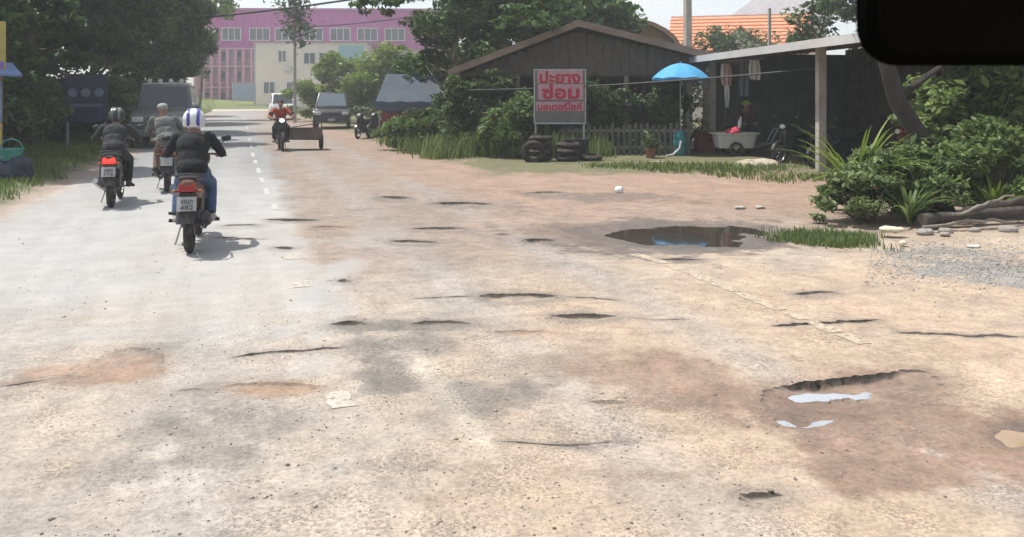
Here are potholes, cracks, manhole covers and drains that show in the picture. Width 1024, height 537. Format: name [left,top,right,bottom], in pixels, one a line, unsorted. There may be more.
crack [232,347,345,358]
pothole [409,320,471,332]
pothole [329,320,367,330]
pothole [759,369,948,434]
crack [502,441,619,451]
pothole [738,492,784,503]
pothole [560,219,791,250]
pothole [476,293,560,304]
pothole [550,313,618,322]
